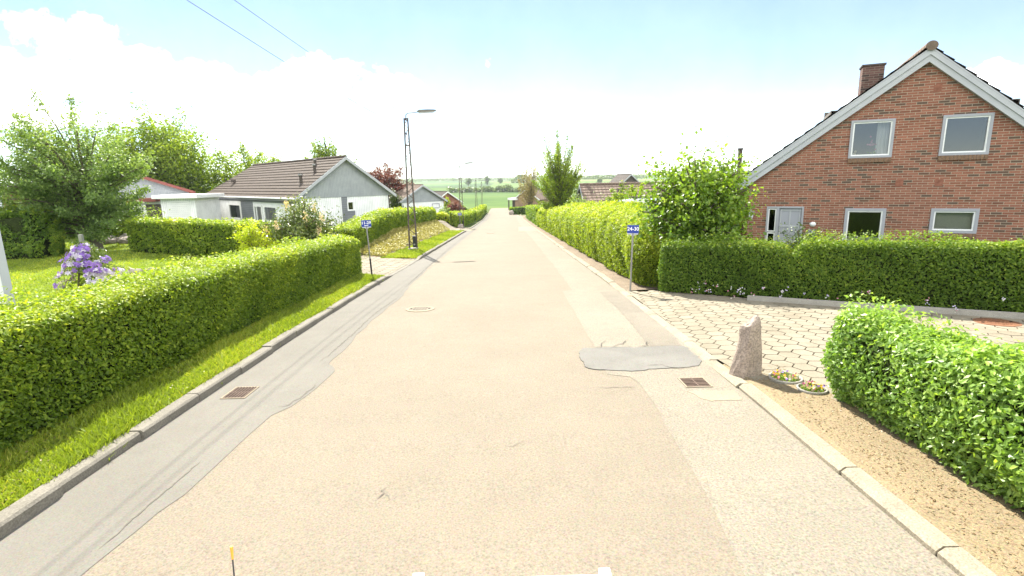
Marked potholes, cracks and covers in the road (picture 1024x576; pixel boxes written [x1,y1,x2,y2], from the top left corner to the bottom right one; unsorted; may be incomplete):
drain grate [677,377,713,388]
drain grate [220,386,260,399]
